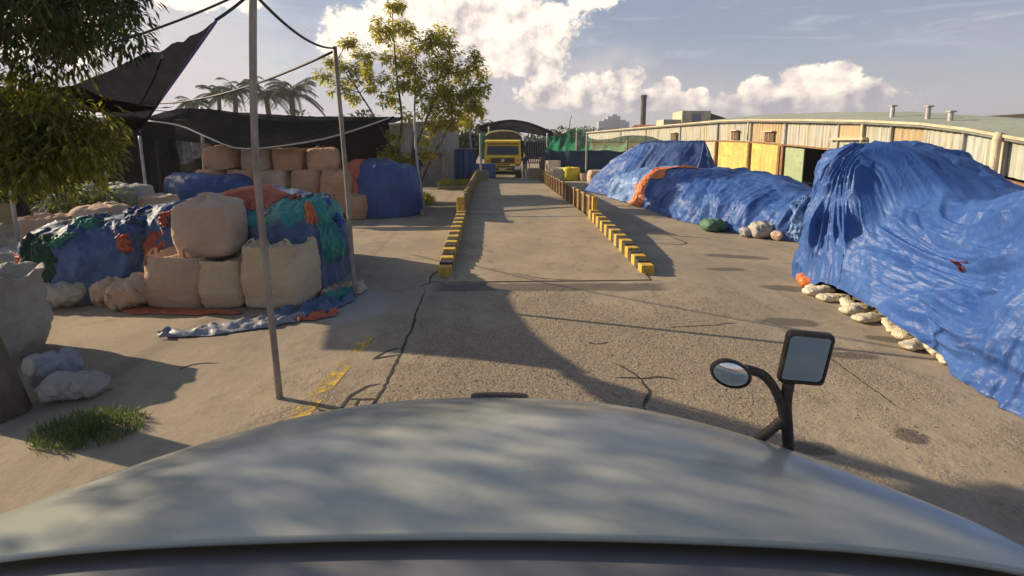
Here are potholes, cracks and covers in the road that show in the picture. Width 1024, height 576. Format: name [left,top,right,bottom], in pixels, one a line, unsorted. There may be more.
crack [617,364,679,410]
